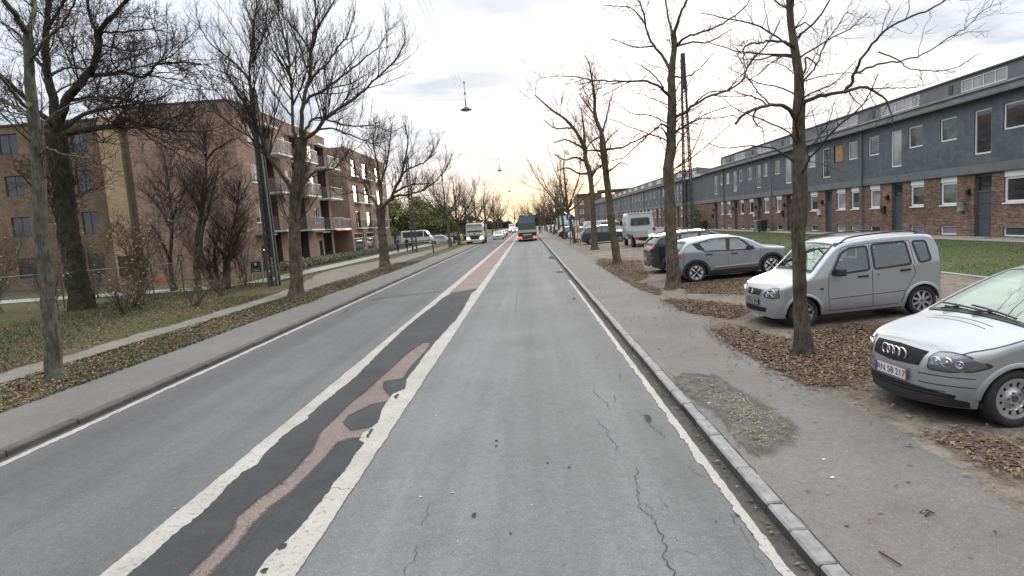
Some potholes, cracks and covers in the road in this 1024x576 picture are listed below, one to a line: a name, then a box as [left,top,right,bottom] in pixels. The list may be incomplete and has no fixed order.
crack [577,277,852,576]
